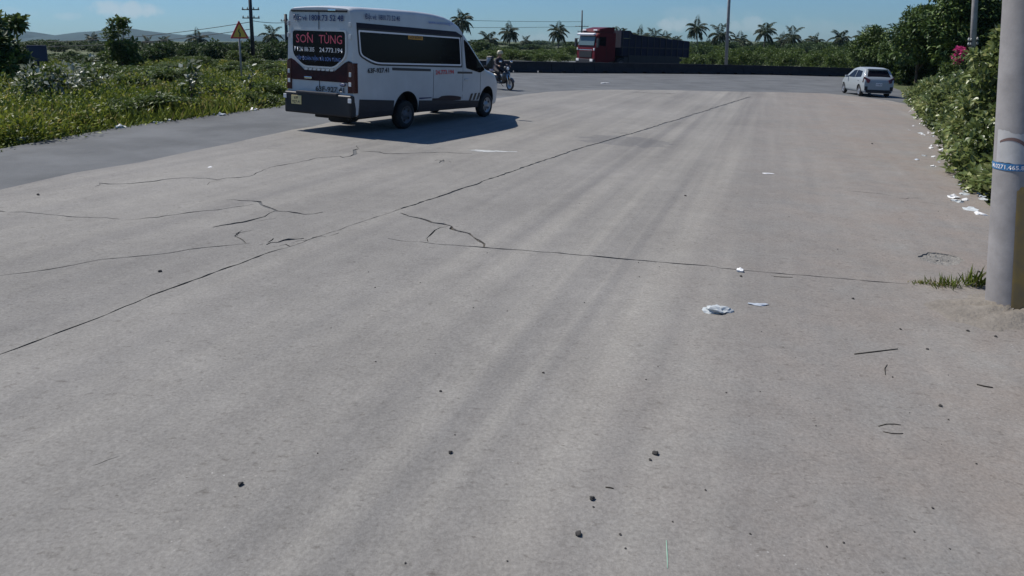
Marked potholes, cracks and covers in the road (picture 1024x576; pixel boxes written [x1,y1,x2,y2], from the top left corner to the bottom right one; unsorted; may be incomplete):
crack [1,200,338,276]
crack [401,213,485,248]
crack [99,147,472,185]
pothole [918,252,965,266]
